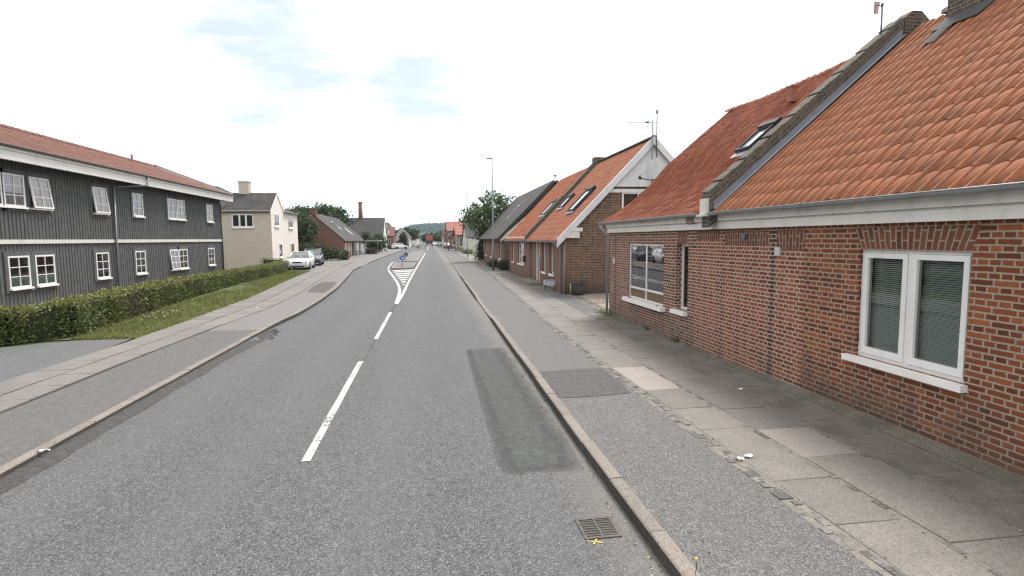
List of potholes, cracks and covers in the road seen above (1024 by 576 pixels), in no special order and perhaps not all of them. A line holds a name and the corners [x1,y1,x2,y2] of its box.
drain grate [575,516,622,540]
